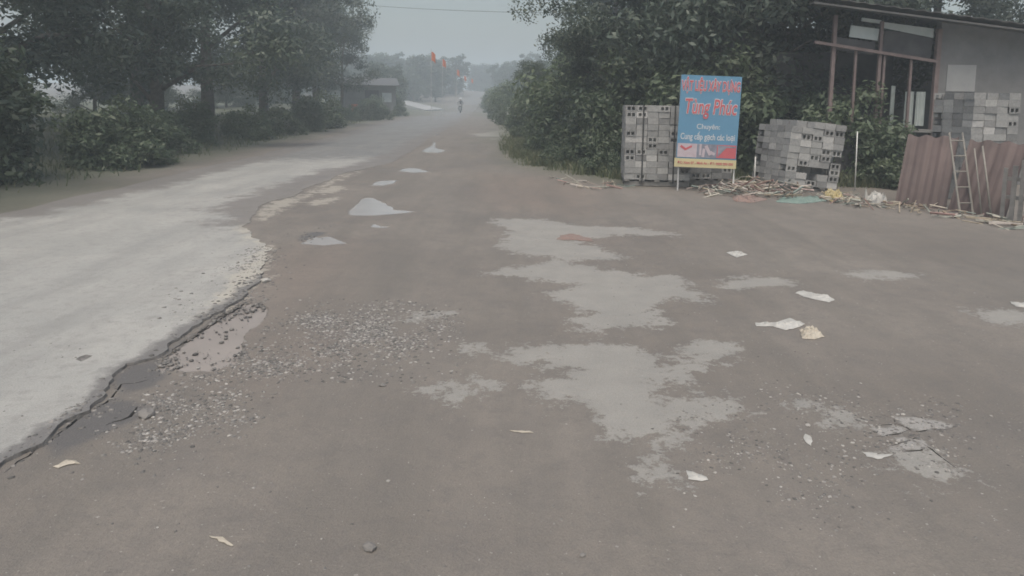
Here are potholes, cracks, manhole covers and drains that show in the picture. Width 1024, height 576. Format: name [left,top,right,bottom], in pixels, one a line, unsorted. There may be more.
pothole [154,301,269,372]
crack [4,304,244,473]
crack [877,414,956,468]
